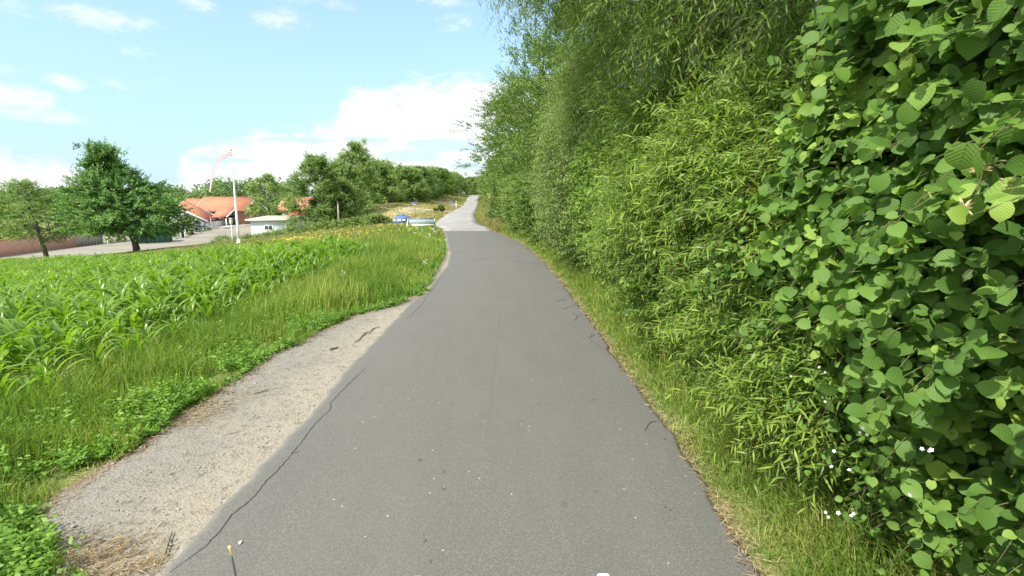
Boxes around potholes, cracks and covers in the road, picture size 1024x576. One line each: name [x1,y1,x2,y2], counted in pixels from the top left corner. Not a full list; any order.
crack [171,370,363,572]
